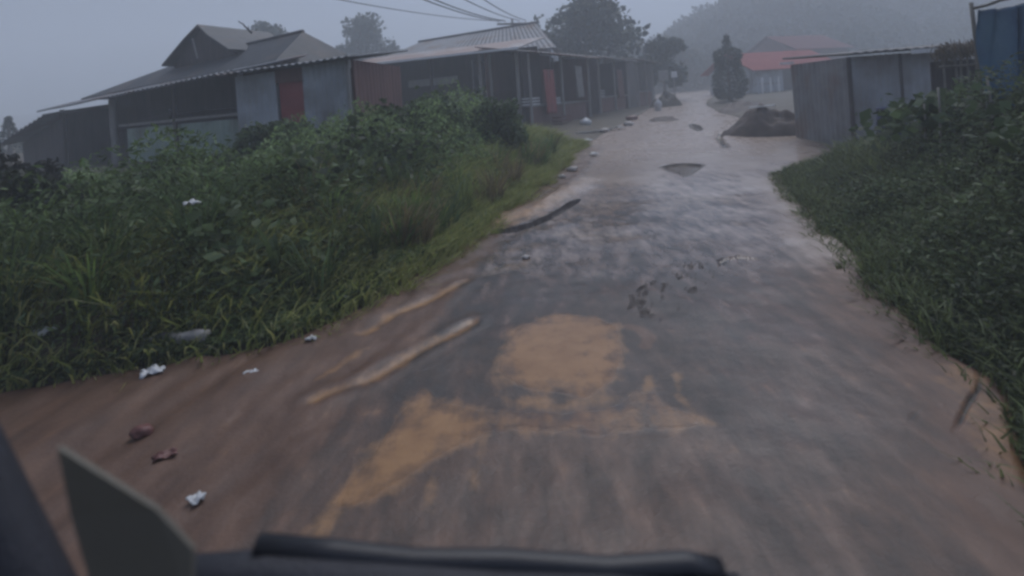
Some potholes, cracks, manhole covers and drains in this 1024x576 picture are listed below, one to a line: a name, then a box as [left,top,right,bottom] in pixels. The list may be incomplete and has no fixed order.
pothole [658,163,706,178]
